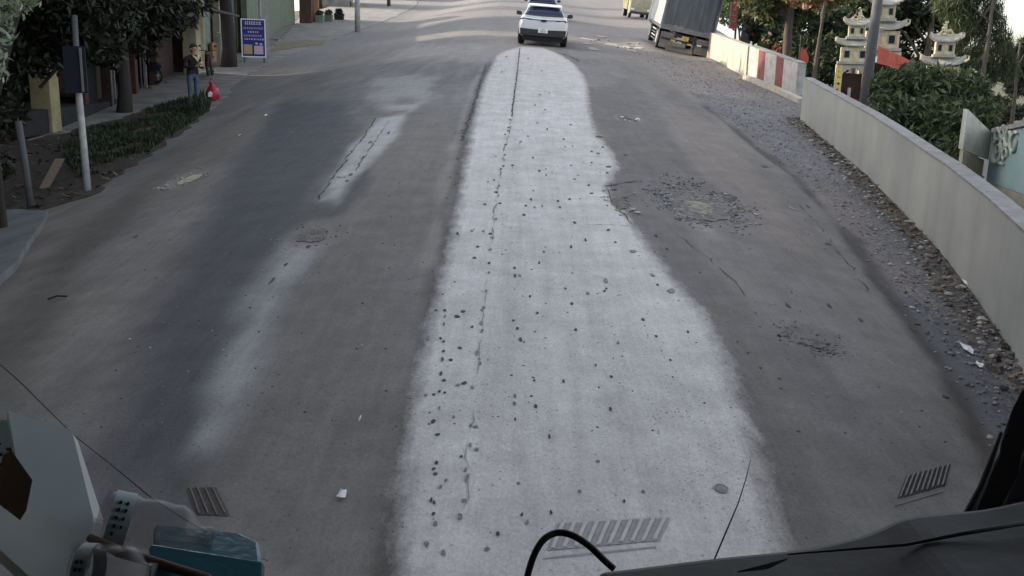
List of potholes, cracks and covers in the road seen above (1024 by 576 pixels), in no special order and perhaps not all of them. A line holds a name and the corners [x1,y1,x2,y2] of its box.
crack [801,206,868,291]
crack [597,181,635,226]
crack [492,48,521,240]
pothole [773,320,857,357]
drain grate [894,463,950,506]
drain grate [543,516,670,559]
drain grate [186,486,230,516]
crack [317,118,386,201]
pothole [640,172,762,235]
